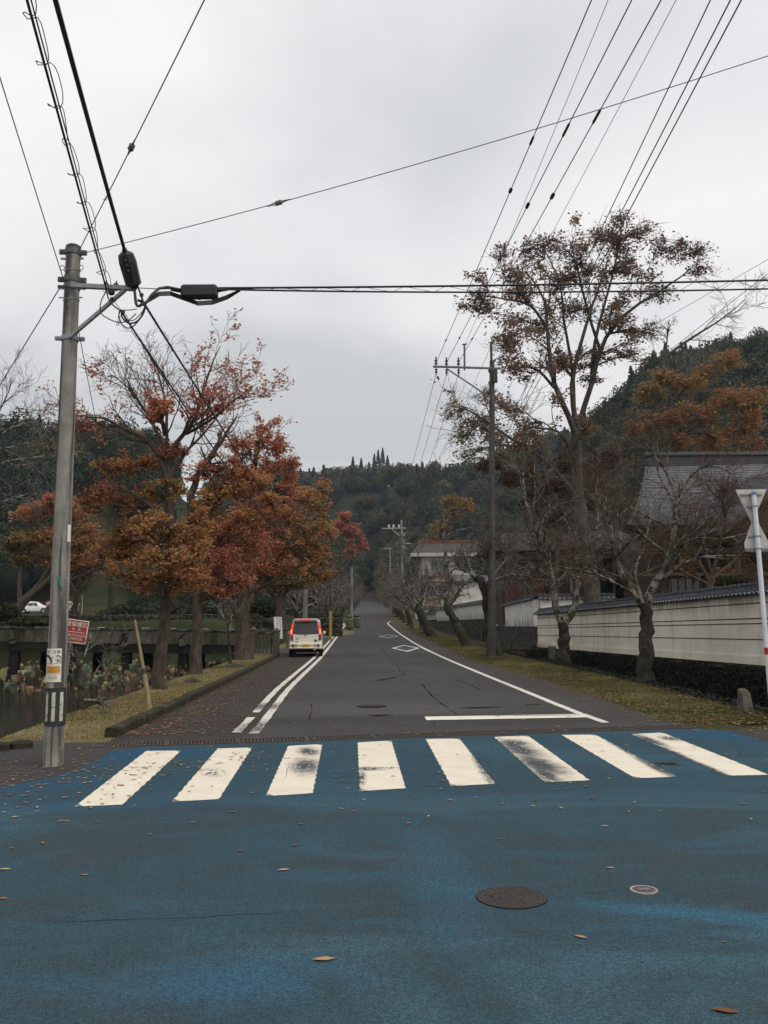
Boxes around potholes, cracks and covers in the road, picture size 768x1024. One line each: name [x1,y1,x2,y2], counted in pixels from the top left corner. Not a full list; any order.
utility cover [630,885,658,895]
manhole cover [476,886,547,909]
